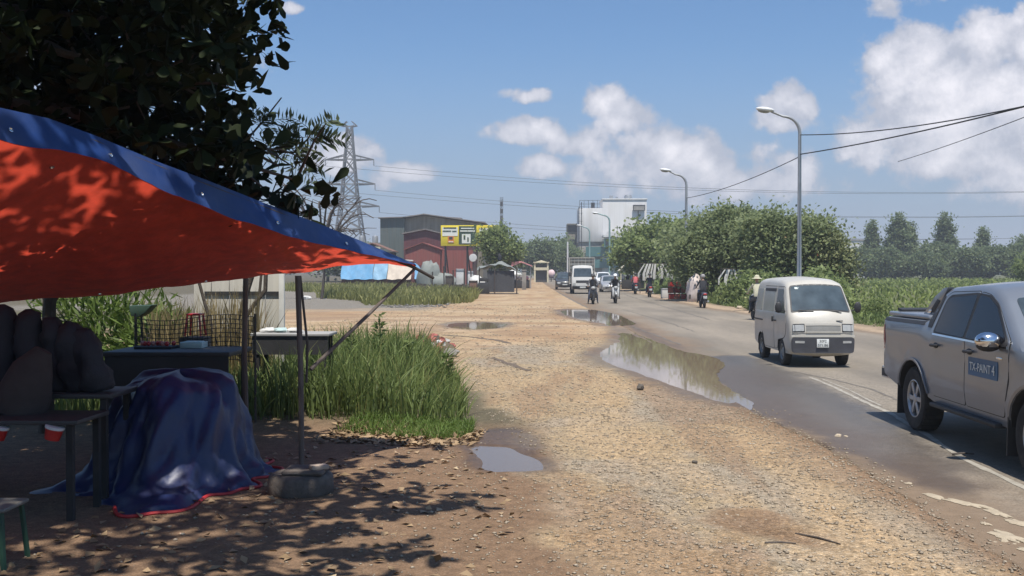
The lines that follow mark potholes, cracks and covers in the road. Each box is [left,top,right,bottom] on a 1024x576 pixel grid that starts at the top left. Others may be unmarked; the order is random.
pothole [453,443,564,474]
pothole [437,321,519,330]
pothole [582,326,754,411]
pothole [552,308,636,327]
